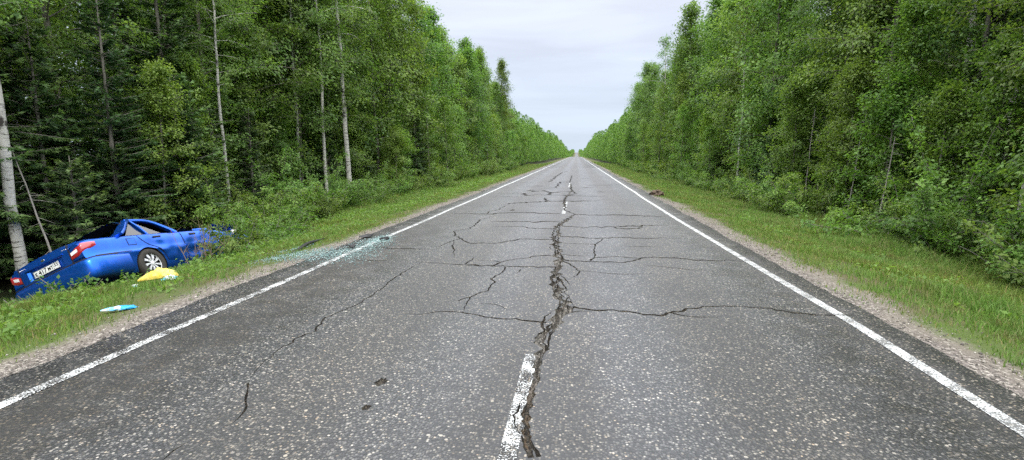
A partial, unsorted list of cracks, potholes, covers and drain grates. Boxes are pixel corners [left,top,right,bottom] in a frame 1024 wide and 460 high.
crack [163,171,847,460]
